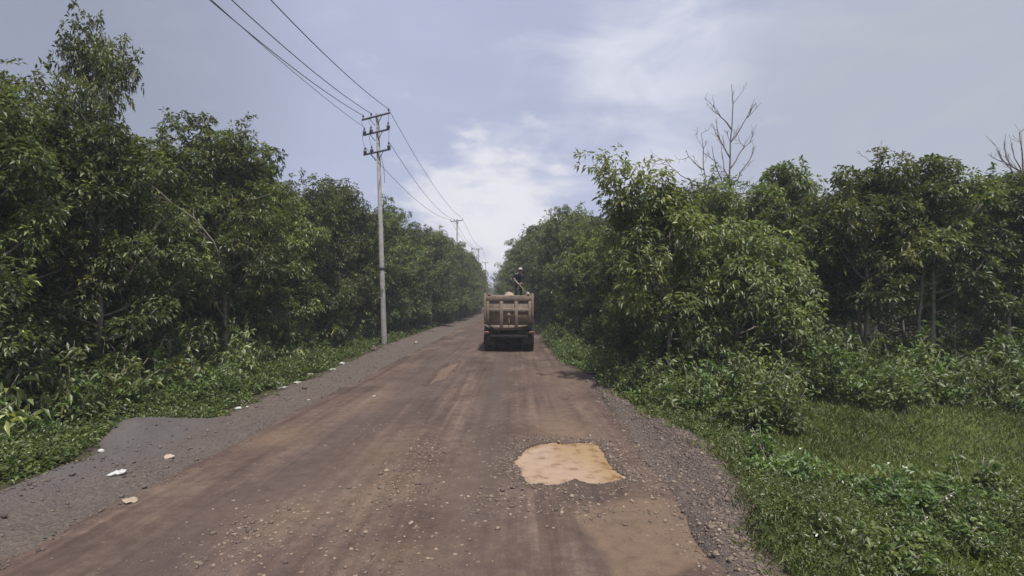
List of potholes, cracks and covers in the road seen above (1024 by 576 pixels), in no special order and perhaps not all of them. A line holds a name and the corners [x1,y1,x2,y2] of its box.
pothole [503,438,636,489]
